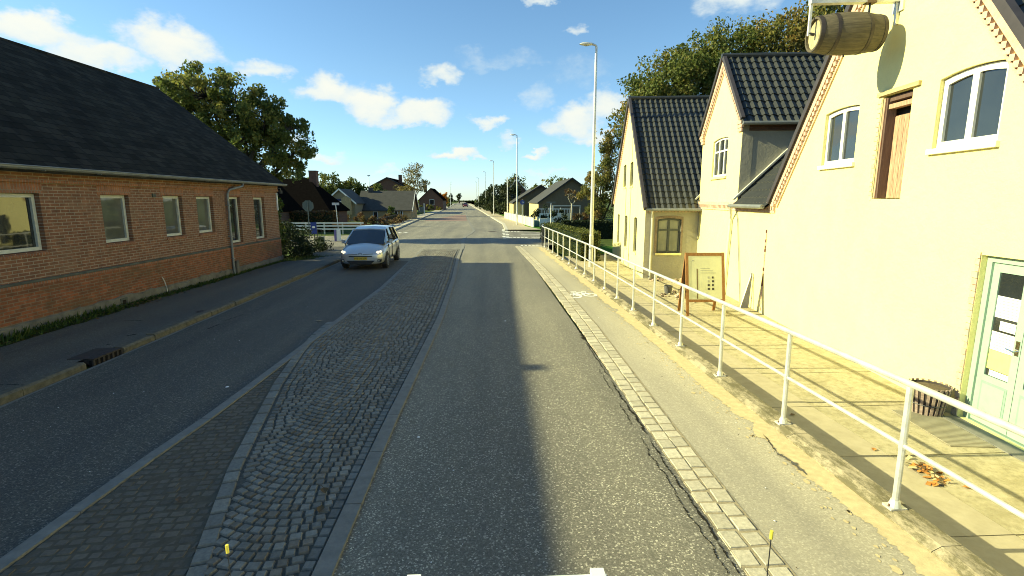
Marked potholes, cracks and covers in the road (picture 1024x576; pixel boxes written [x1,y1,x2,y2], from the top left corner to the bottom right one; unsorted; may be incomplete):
crack [765,437,807,475]
drain grate [67,347,123,368]
